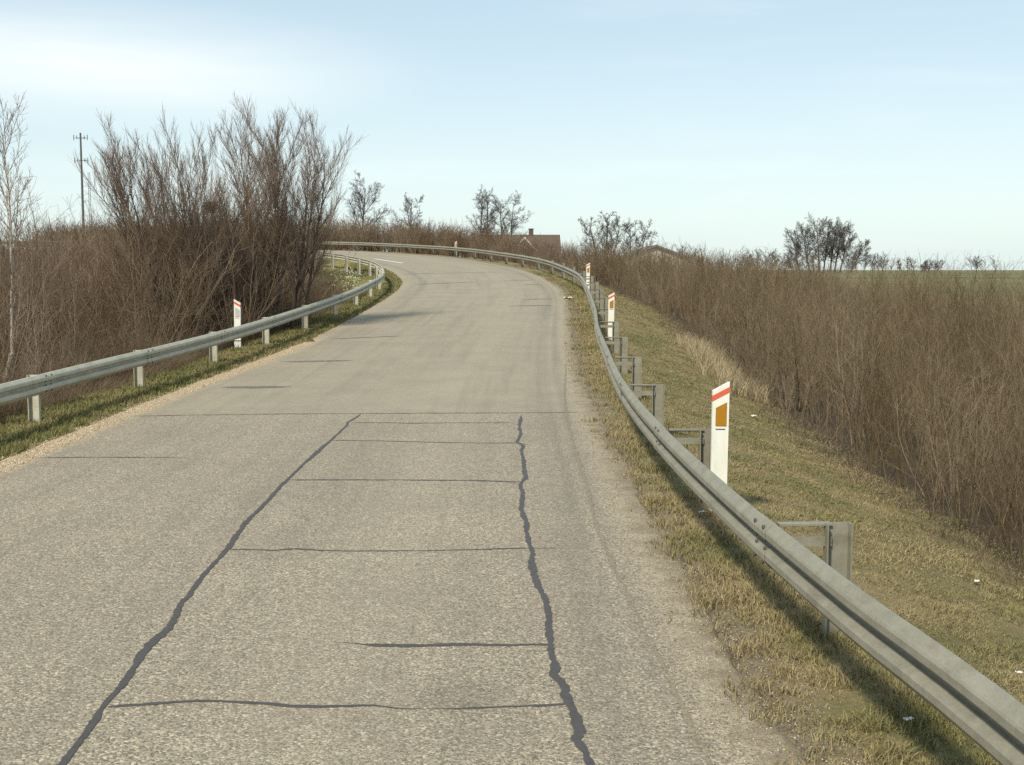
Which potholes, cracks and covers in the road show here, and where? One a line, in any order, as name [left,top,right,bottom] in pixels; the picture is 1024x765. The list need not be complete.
crack [40,364,712,765]
